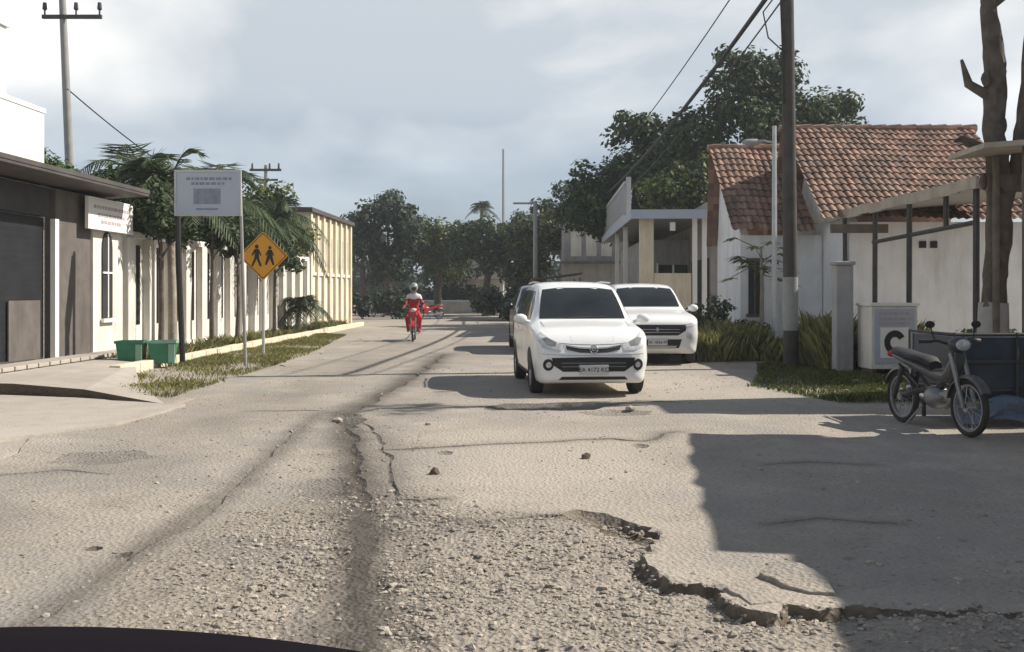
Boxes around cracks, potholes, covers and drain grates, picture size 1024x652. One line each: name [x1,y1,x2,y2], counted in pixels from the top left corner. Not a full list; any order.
crack [299,354,672,652]
